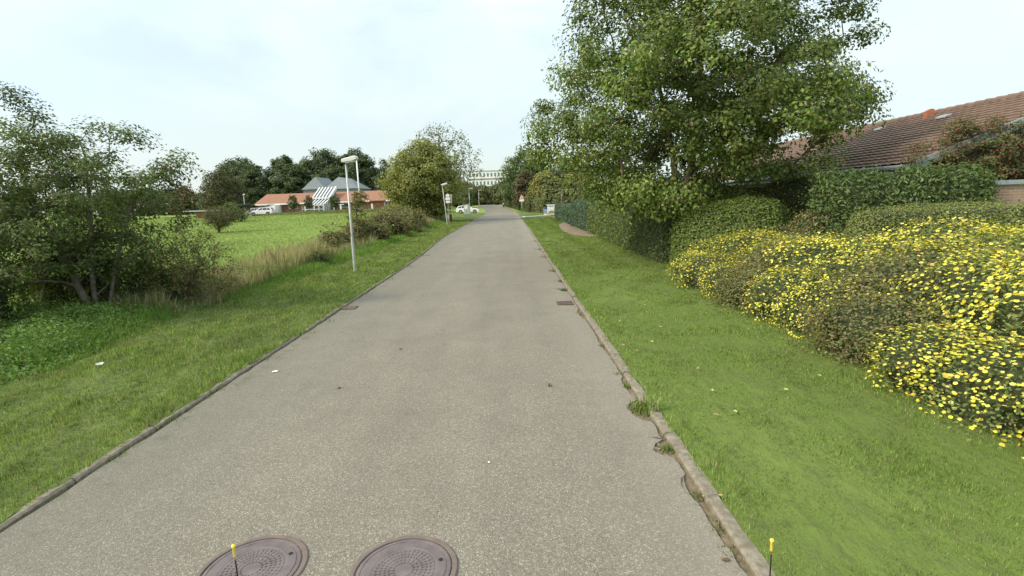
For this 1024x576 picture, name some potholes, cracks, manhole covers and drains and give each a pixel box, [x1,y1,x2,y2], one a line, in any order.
manhole cover [348,535,458,576]
manhole cover [195,535,309,576]
